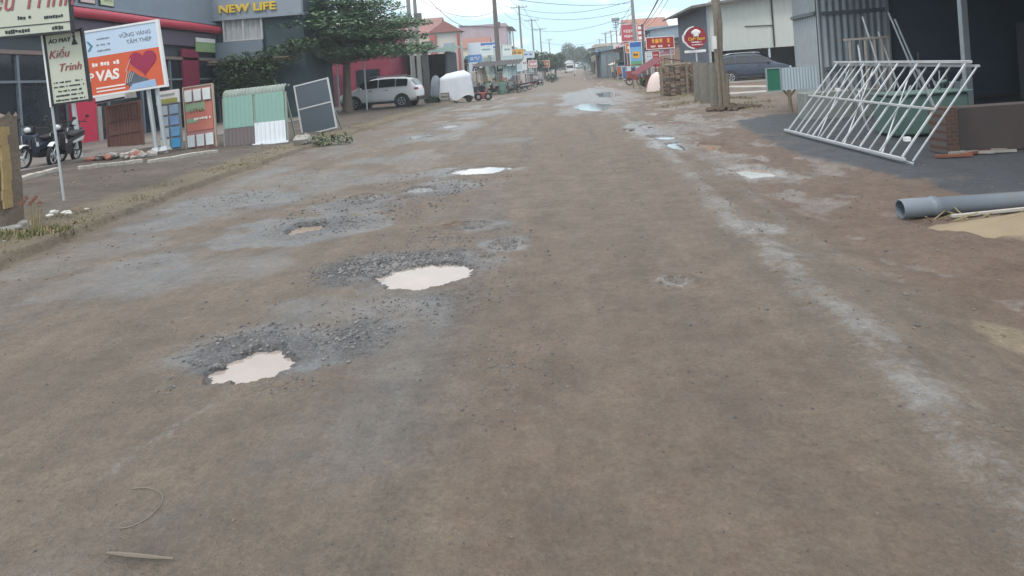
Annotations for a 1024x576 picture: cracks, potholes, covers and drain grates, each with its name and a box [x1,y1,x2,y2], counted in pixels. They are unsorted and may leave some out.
pothole [474,234,542,259]
pothole [646,272,717,291]
pothole [424,218,510,235]
pothole [388,182,452,197]
pothole [418,162,548,180]
pothole [346,256,503,299]
pothole [169,334,328,401]
pothole [570,89,654,102]
pothole [548,100,643,118]
